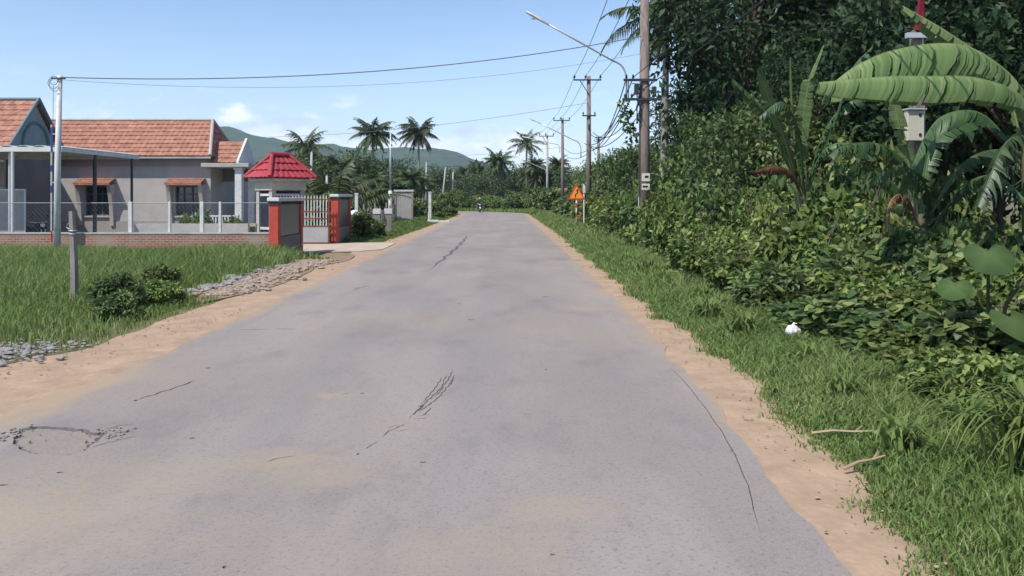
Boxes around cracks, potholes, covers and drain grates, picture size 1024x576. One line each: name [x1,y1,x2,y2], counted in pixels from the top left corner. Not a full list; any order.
crack [366,371,455,449]
pothole [0,424,137,456]
crack [677,374,760,529]
crack [429,237,467,270]
